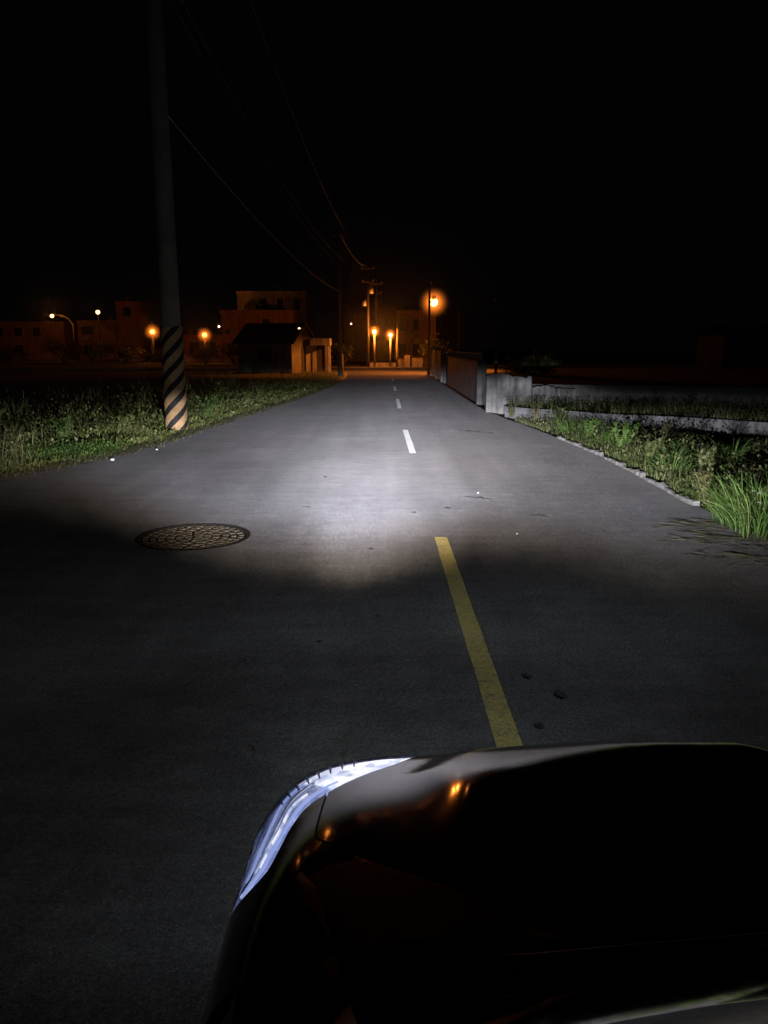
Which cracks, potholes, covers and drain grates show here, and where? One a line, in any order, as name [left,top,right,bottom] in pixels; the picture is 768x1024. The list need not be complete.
manhole cover [135,524,251,551]
